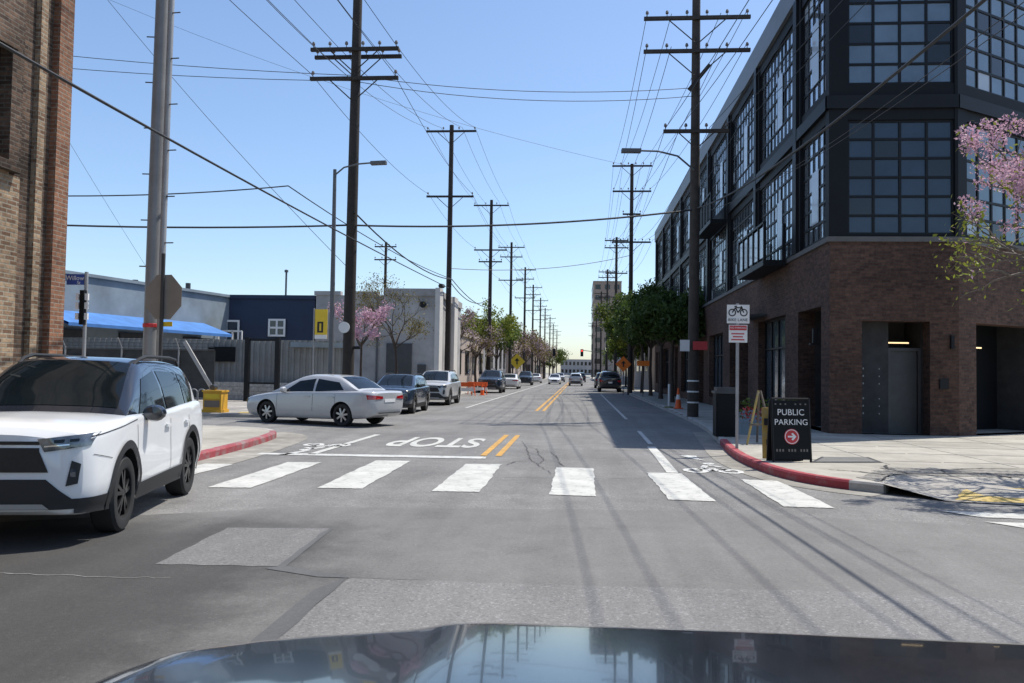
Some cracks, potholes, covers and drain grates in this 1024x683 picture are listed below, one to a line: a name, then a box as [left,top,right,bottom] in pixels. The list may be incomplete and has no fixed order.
crack [507,442,564,478]
